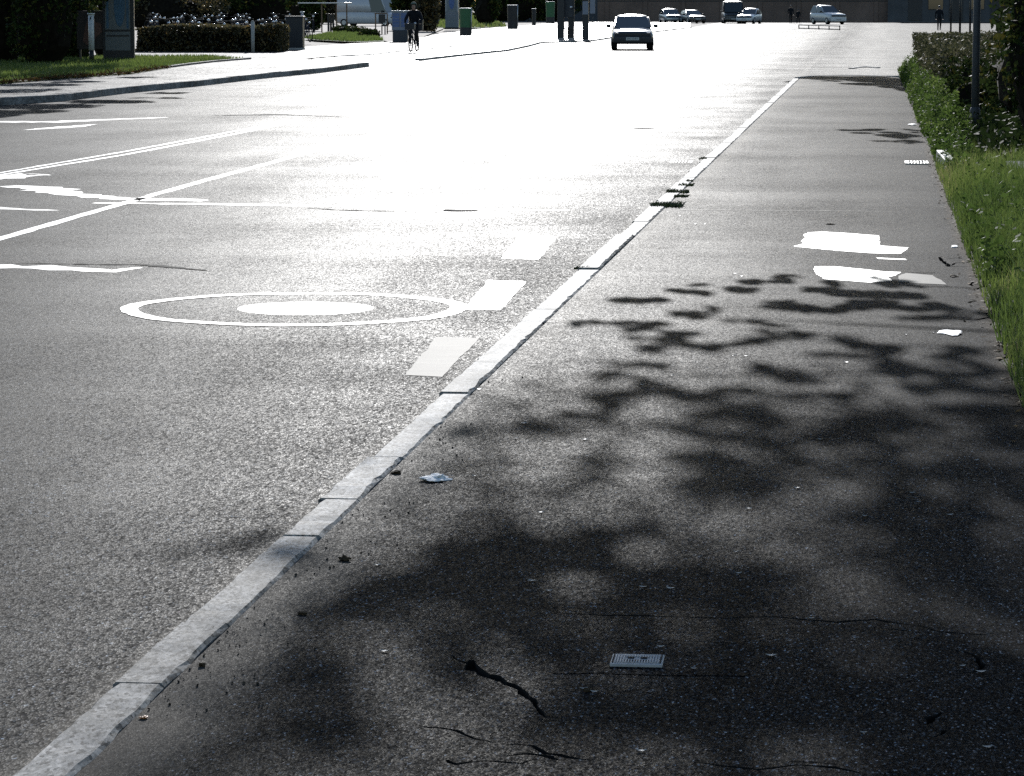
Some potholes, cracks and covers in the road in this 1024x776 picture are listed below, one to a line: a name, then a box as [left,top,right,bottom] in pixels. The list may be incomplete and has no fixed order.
crack [557,612,994,675]
crack [423,655,745,765]
crack [697,761,860,773]
